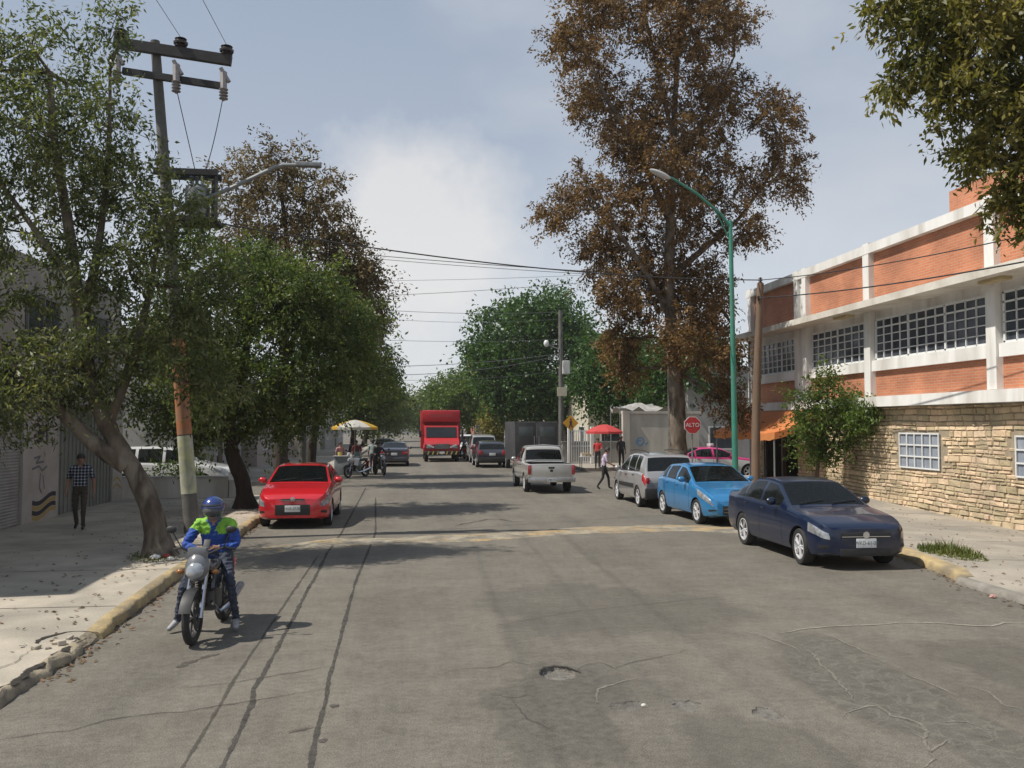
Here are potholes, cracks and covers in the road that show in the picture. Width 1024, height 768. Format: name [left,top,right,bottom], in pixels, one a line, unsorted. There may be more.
crack [4,488,366,768]
crack [446,648,689,673]
pothole [752,707,787,723]
crack [783,622,1024,633]
crack [491,694,570,734]
pothole [539,667,575,680]
